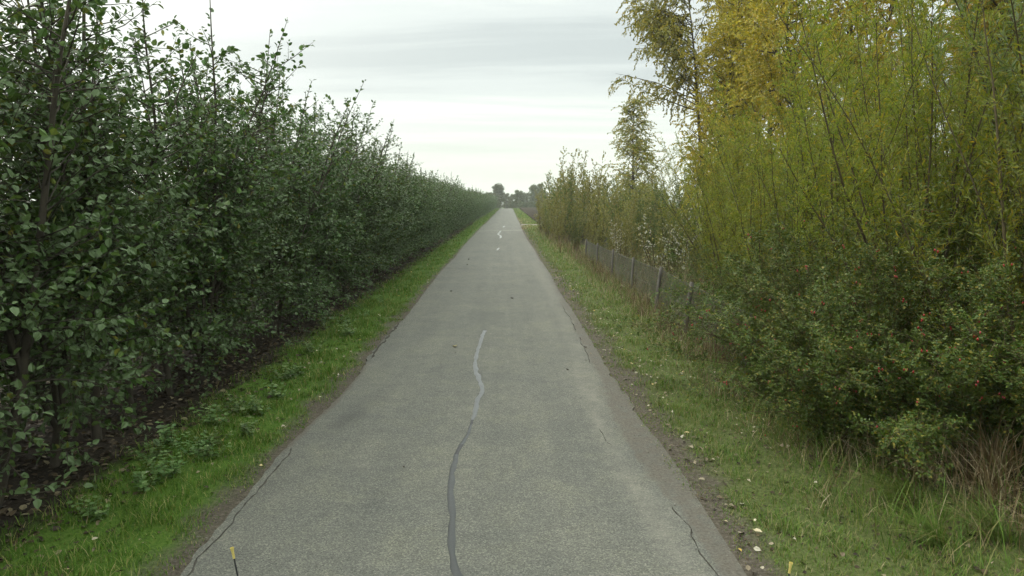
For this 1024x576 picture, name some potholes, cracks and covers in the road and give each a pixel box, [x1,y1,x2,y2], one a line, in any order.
crack [672,507,719,576]
crack [187,449,292,576]
